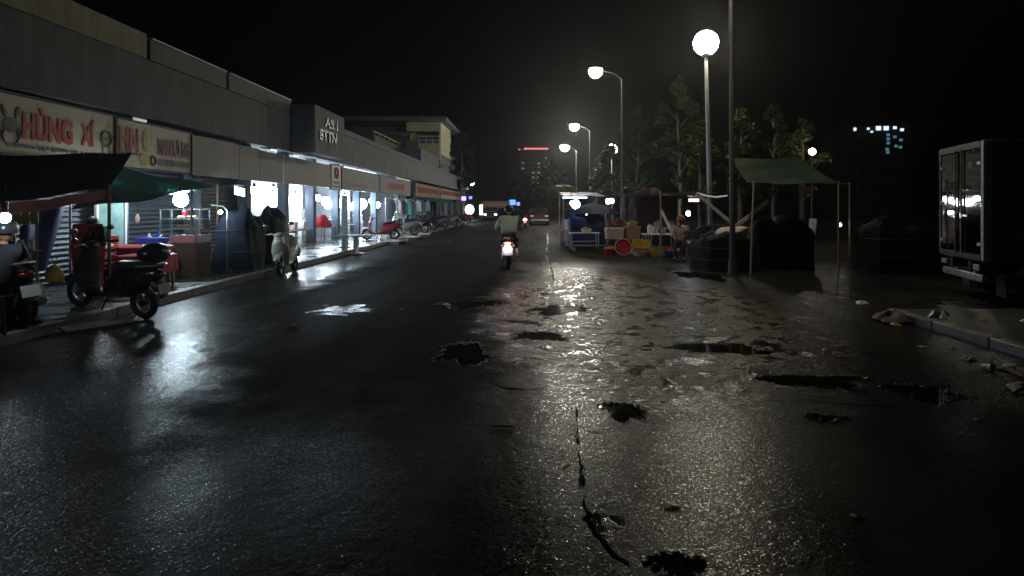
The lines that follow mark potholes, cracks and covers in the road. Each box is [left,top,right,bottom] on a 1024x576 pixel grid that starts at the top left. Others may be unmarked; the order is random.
pothole [651,341,785,355]
pothole [750,373,873,390]
pothole [799,411,851,423]
pothole [527,304,593,317]
crack [557,404,631,569]
crack [492,233,710,376]
pothole [509,330,573,342]
pothole [596,401,649,423]
pothole [641,551,709,576]
pothole [875,380,972,406]
pothole [430,339,493,367]
pothole [667,270,731,283]
